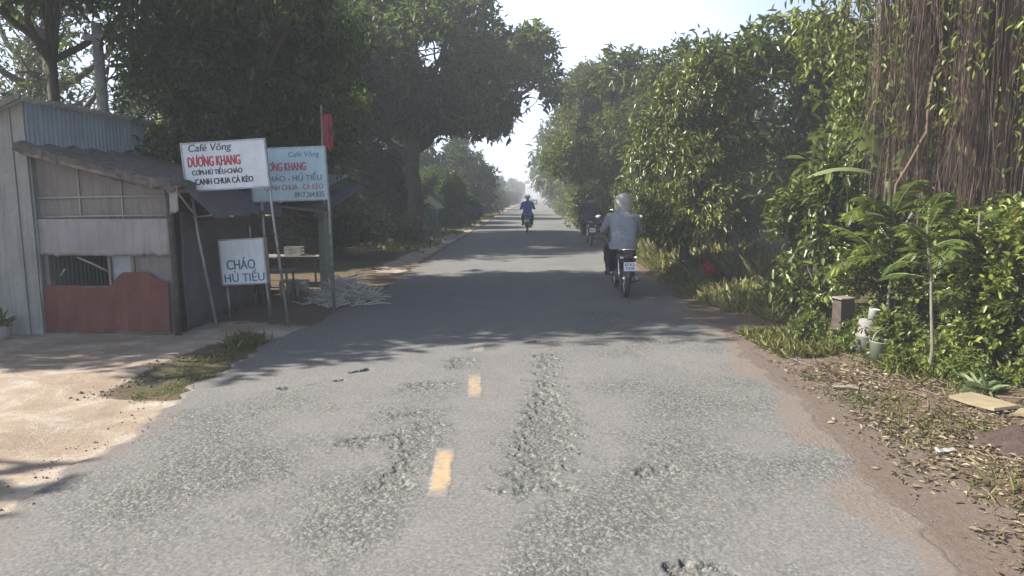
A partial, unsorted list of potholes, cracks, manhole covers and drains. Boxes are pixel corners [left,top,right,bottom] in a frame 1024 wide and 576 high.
pothole [663,561,731,576]
pothole [634,464,683,480]
